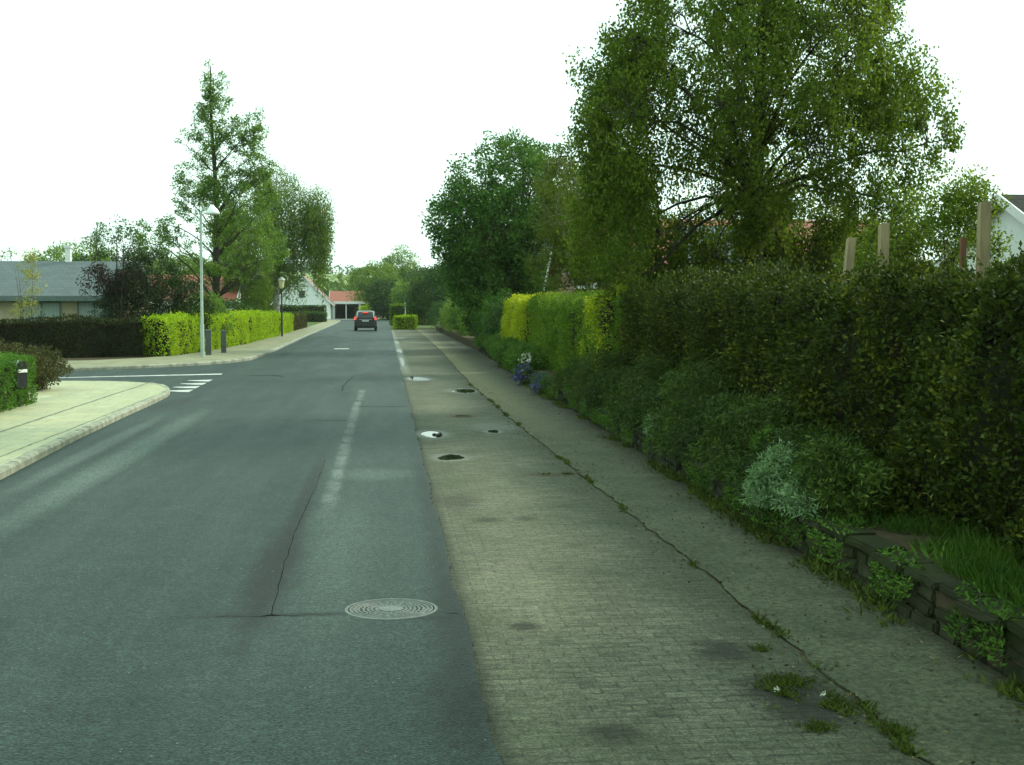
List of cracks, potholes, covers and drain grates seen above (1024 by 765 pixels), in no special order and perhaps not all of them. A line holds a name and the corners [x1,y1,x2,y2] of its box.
crack [222,461,460,617]
manhole cover [345,598,438,620]
